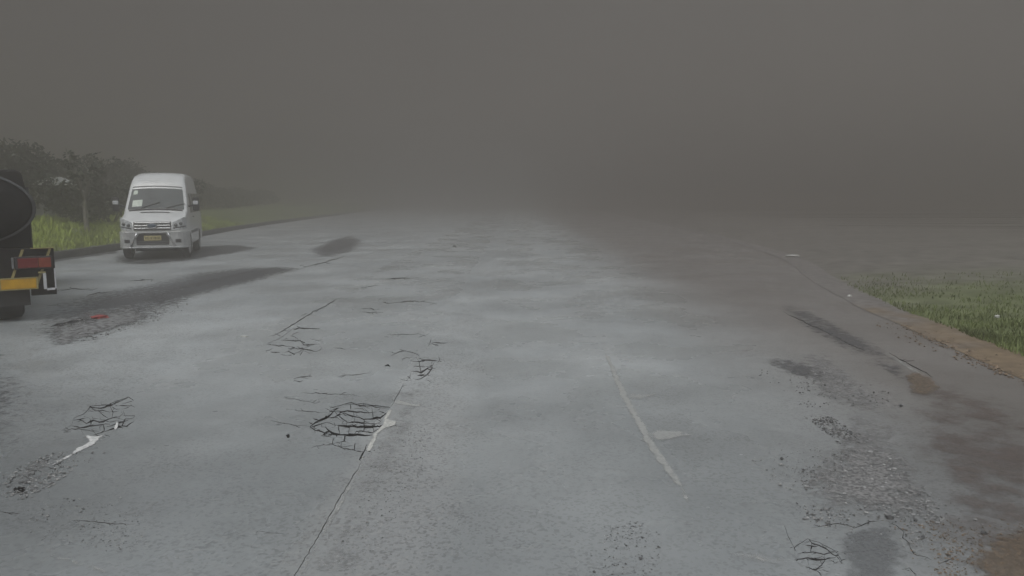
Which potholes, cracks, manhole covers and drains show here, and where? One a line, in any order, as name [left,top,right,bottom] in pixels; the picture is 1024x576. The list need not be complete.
crack [275,373,365,427]
crack [814,520,951,574]
pothole [7,458,64,492]
